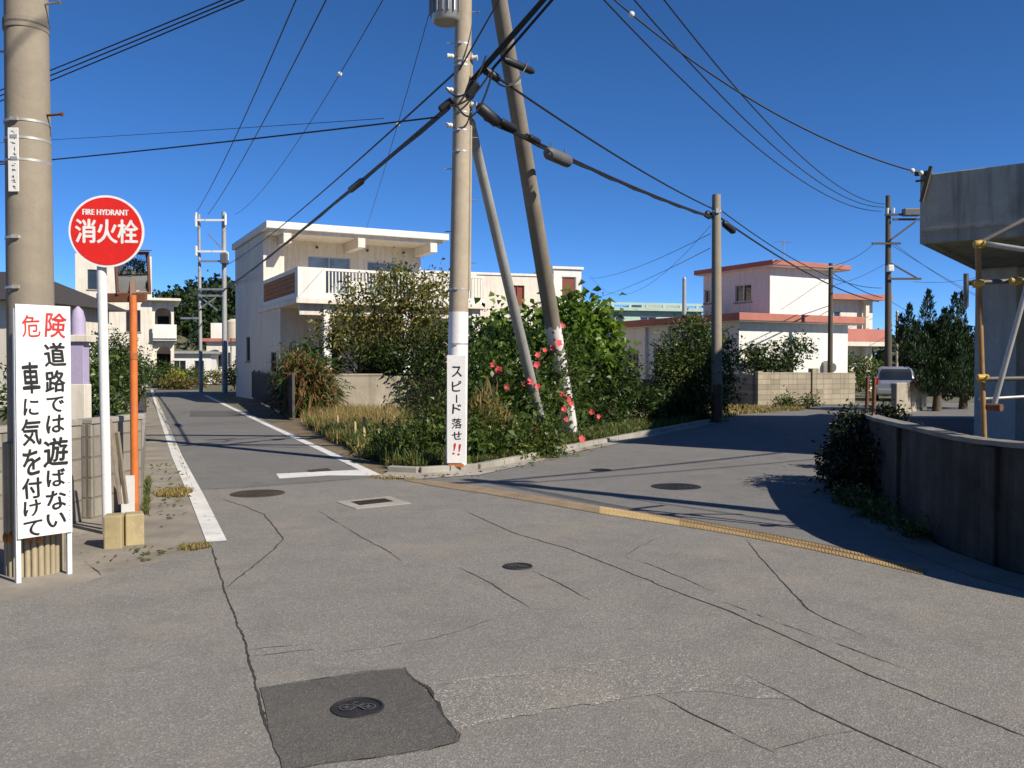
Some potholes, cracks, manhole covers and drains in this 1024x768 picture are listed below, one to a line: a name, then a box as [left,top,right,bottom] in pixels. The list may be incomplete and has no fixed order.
crack [459,567,529,607]
drain grate [336,496,411,509]
manhole cover [230,489,285,497]
manhole cover [331,697,384,718]
crack [211,499,313,767]
crack [655,676,942,768]
manhole cover [503,562,533,570]
crack [471,513,1024,736]
